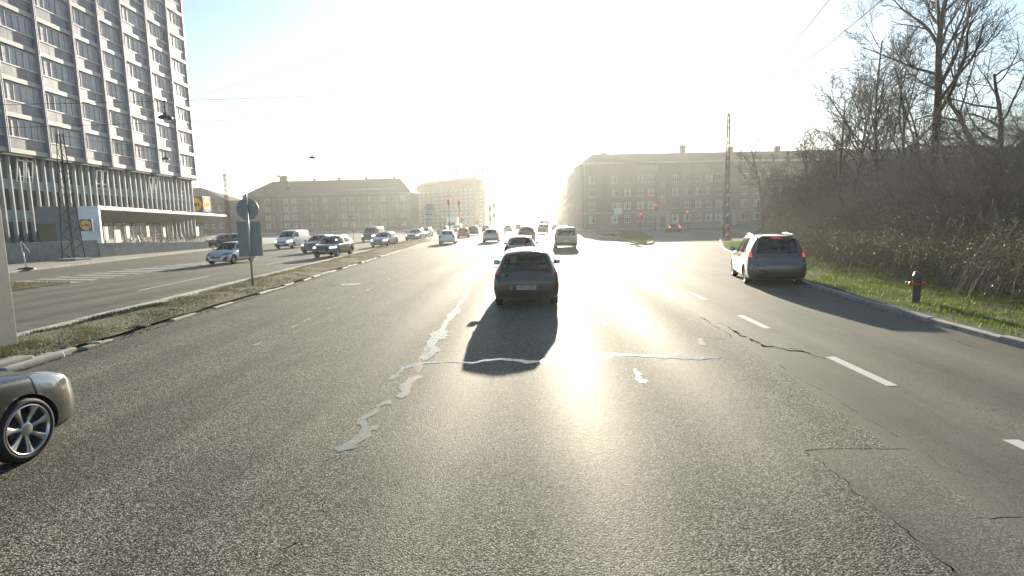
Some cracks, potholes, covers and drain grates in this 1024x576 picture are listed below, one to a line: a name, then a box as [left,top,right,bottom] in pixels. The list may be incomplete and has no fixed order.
crack [805,448,958,575]
crack [701,317,825,359]
